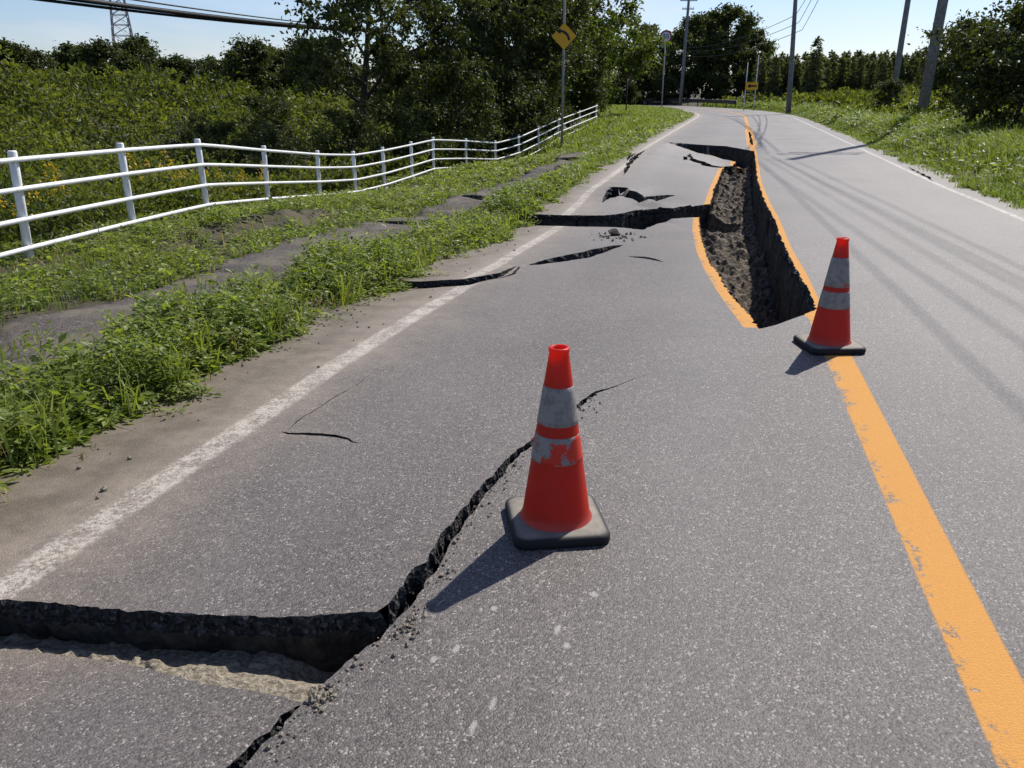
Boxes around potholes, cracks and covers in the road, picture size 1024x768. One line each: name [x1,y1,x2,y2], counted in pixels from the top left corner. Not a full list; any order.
crack [0,374,646,768]
crack [366,132,819,329]
